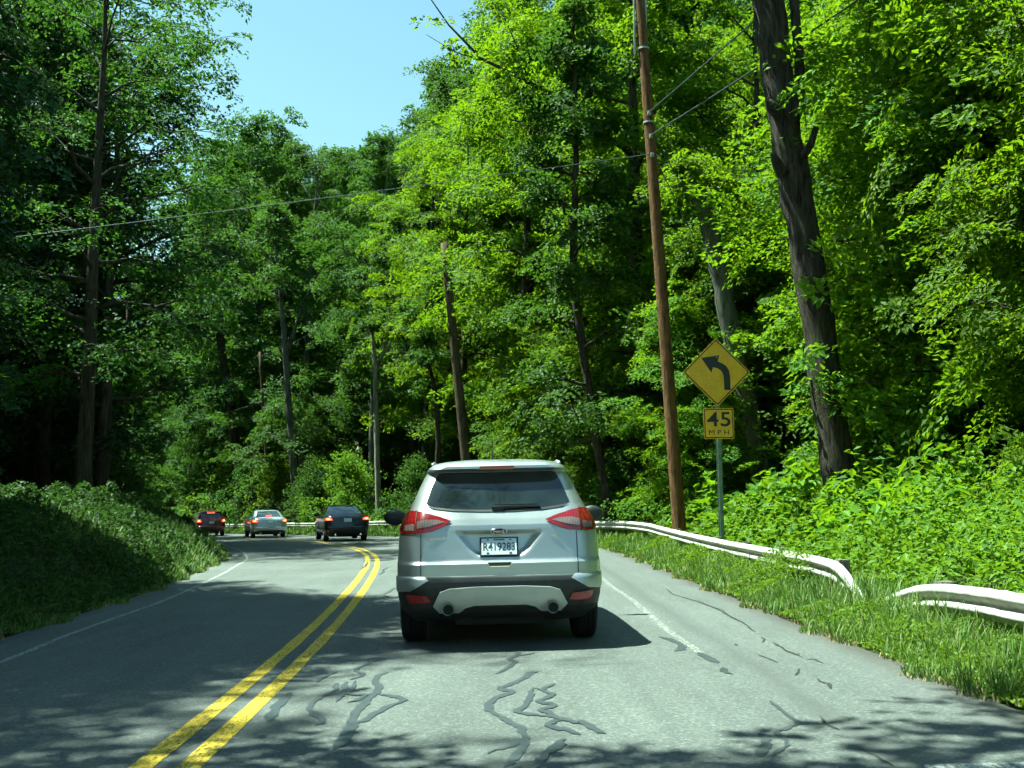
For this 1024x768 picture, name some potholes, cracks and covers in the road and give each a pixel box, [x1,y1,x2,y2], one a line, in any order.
crack [667,589,832,688]
